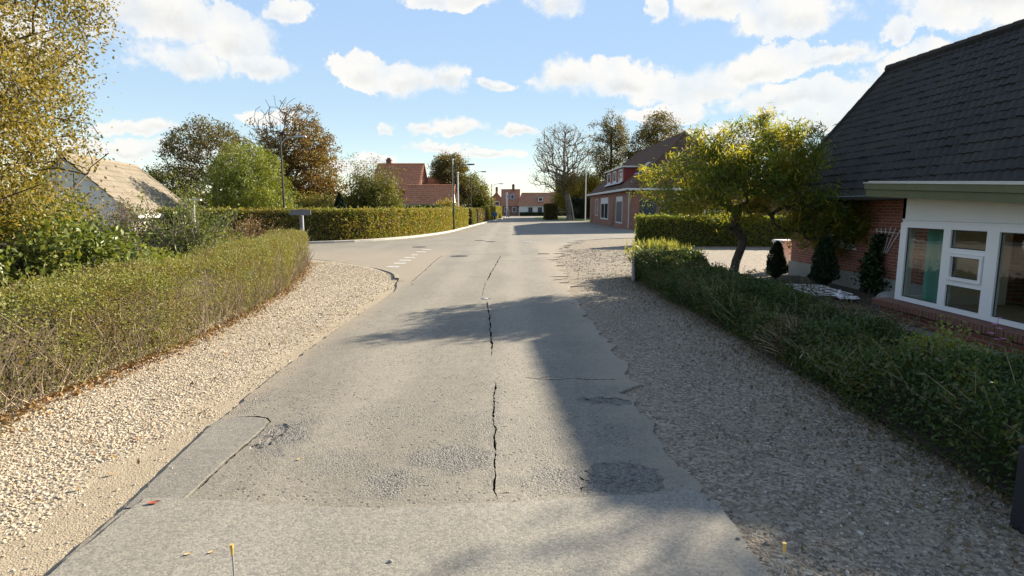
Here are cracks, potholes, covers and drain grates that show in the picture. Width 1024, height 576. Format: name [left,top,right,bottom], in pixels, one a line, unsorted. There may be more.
pothole [250,424,291,450]
